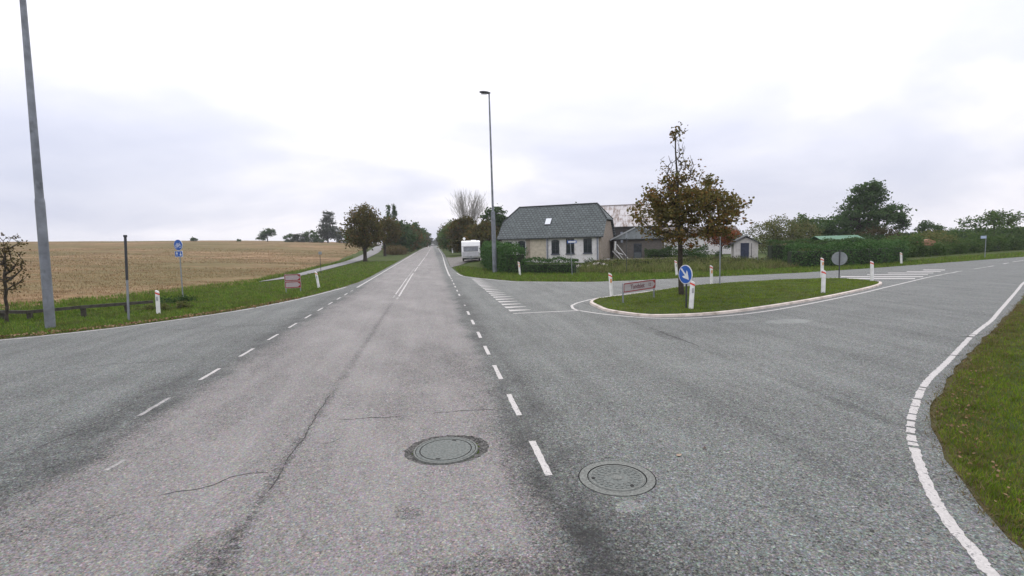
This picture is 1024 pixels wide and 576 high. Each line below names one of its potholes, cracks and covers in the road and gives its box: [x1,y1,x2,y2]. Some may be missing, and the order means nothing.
manhole cover [404,435,489,465]
manhole cover [578,461,657,497]
crack [112,394,338,517]
